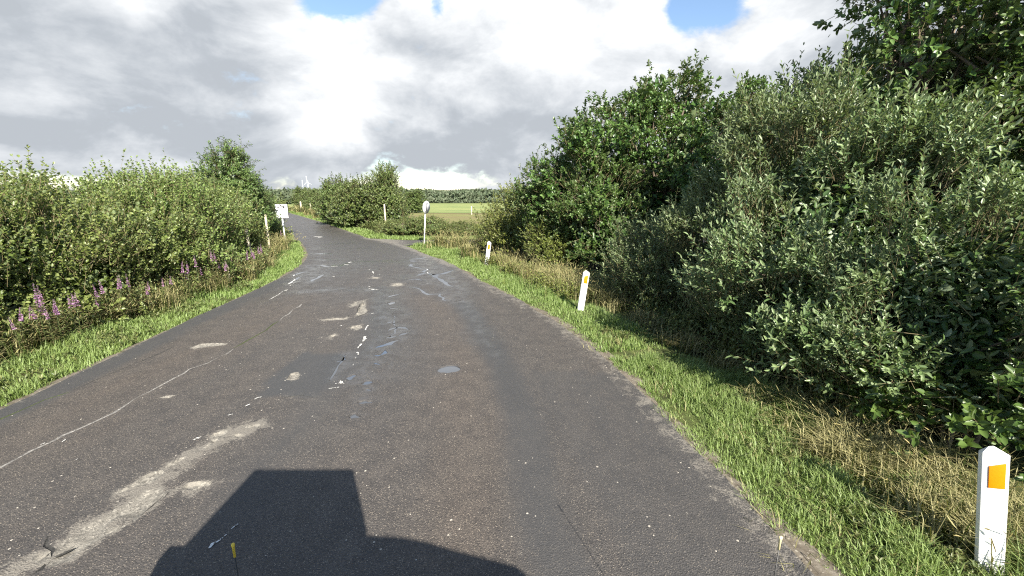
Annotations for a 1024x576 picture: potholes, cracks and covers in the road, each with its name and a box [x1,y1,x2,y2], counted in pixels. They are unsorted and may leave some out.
crack [32,536,75,575]
crack [0,304,302,468]
crack [288,243,461,365]
pothole [437,365,460,373]
crack [329,354,346,381]
